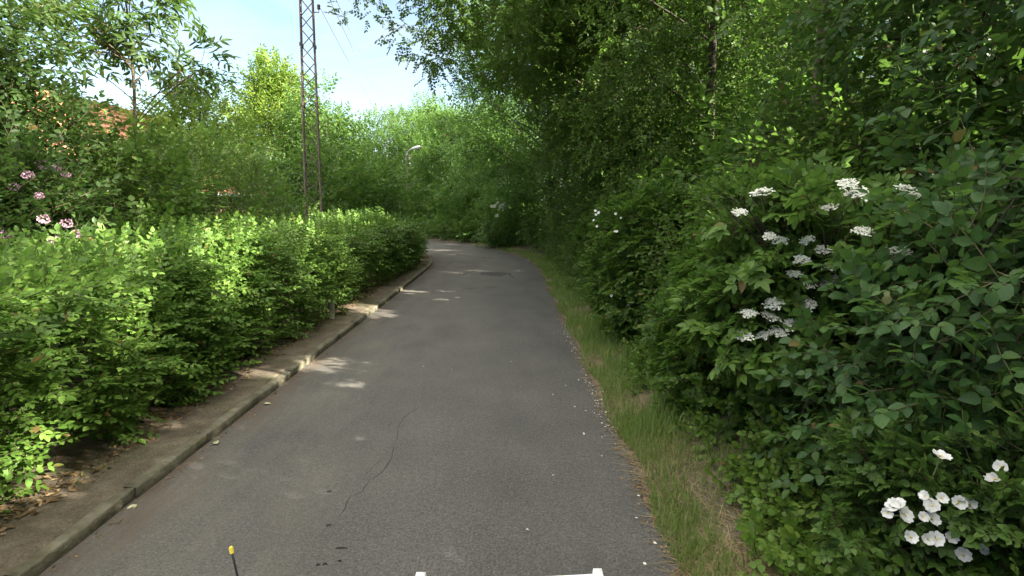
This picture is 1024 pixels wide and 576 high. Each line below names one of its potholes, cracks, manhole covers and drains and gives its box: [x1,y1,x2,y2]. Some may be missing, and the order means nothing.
crack [333,407,419,519]
